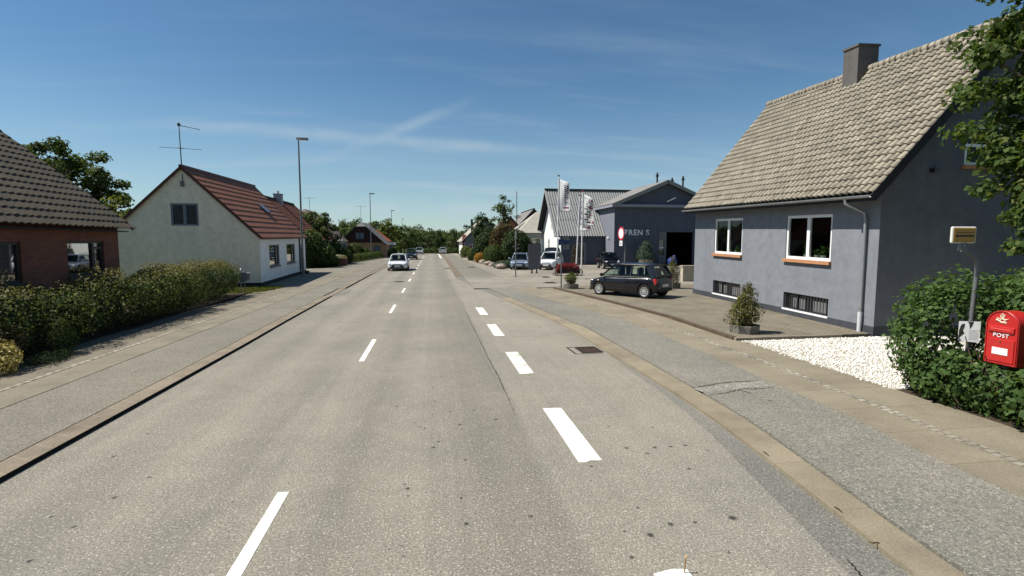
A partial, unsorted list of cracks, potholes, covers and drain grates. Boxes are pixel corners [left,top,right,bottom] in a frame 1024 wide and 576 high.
drain grate [566,346,603,354]
